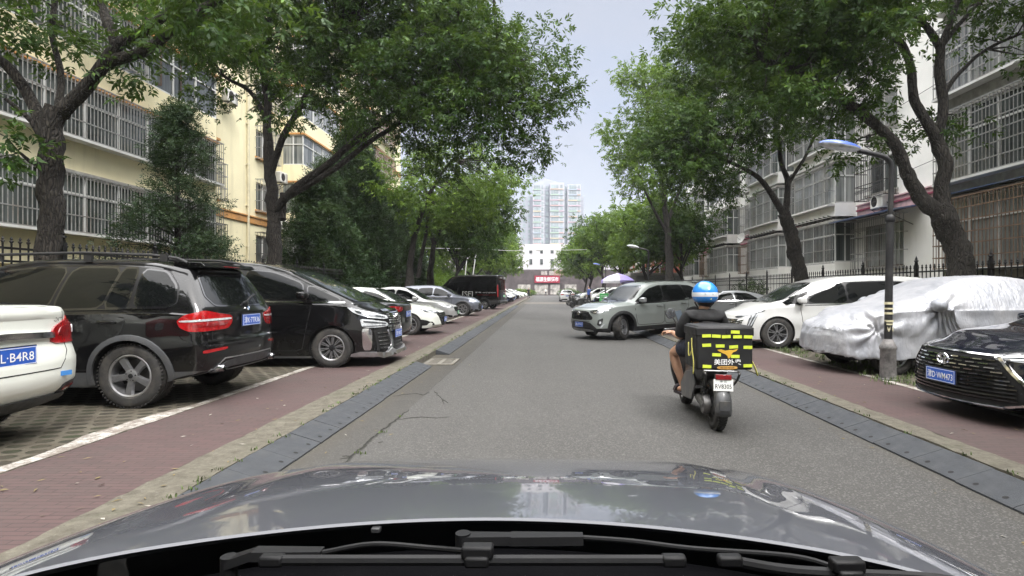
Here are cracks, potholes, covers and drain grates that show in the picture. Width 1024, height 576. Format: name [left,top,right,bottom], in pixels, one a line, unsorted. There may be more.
crack [341,391,448,462]
